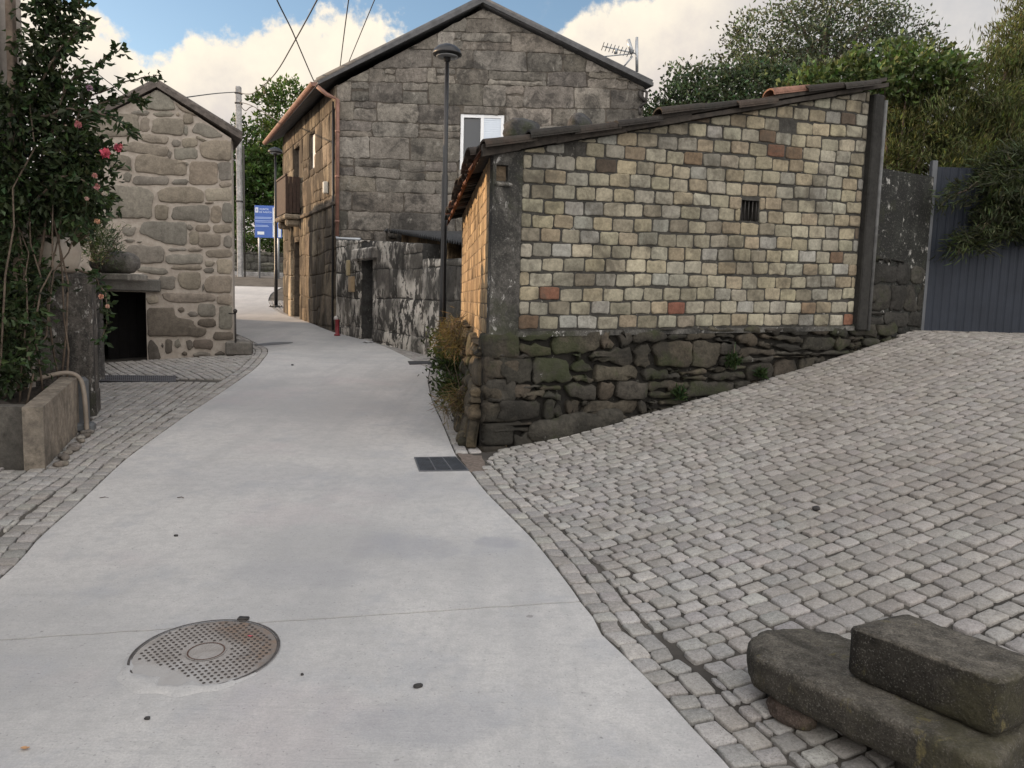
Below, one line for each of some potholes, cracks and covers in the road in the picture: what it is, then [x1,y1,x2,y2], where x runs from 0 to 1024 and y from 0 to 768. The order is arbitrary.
manhole cover [127,616,280,686]
drain grate [414,456,469,472]
